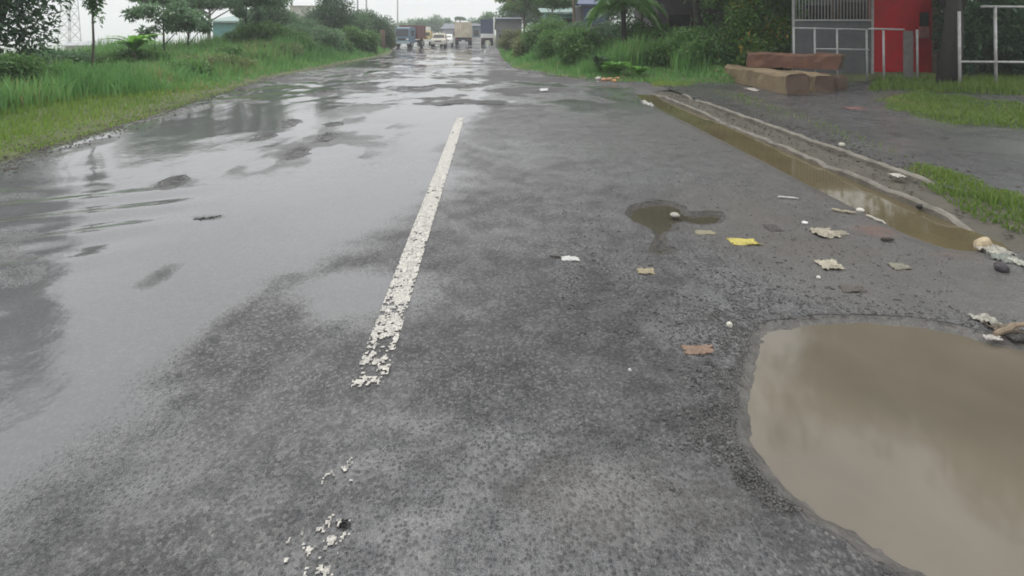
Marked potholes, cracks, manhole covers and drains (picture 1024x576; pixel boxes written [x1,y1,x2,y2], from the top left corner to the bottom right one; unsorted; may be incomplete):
pothole [153,174,192,190]
pothole [624,200,726,255]
pothole [731,313,1024,576]
pothole [282,147,312,160]
